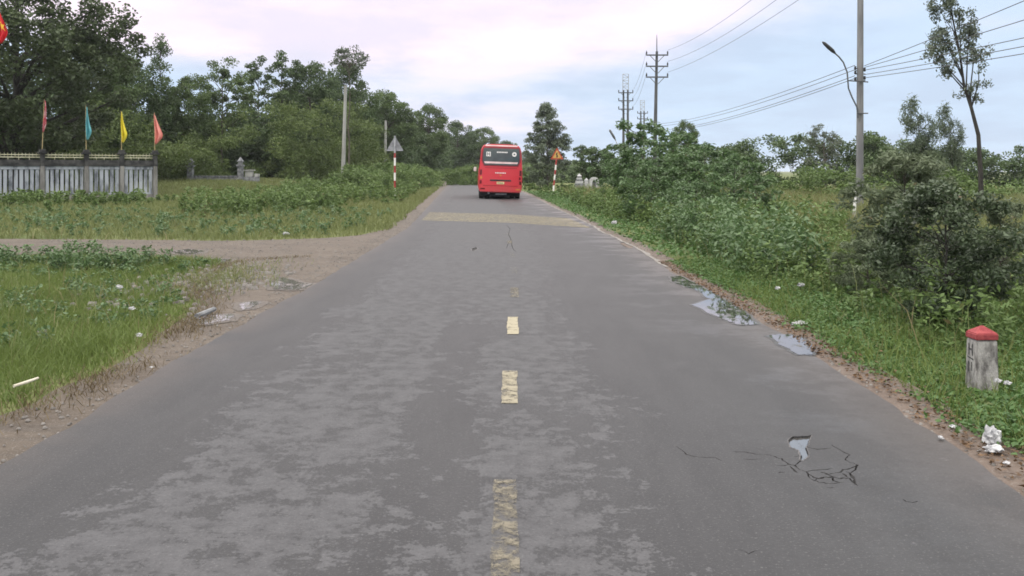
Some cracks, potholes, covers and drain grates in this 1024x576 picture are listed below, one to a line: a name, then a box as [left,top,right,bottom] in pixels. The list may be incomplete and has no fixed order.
pothole [787,435,813,461]
crack [746,445,858,488]
